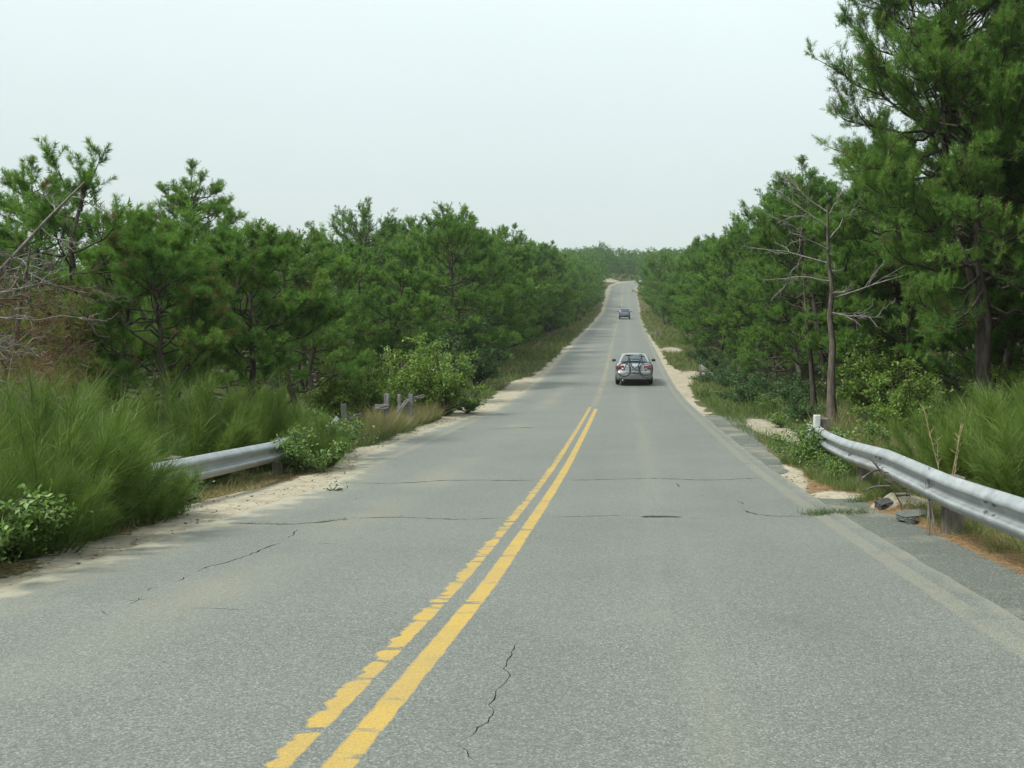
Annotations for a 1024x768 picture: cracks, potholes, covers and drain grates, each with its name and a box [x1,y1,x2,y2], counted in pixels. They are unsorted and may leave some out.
crack [124,517,490,604]
crack [461,642,516,764]
